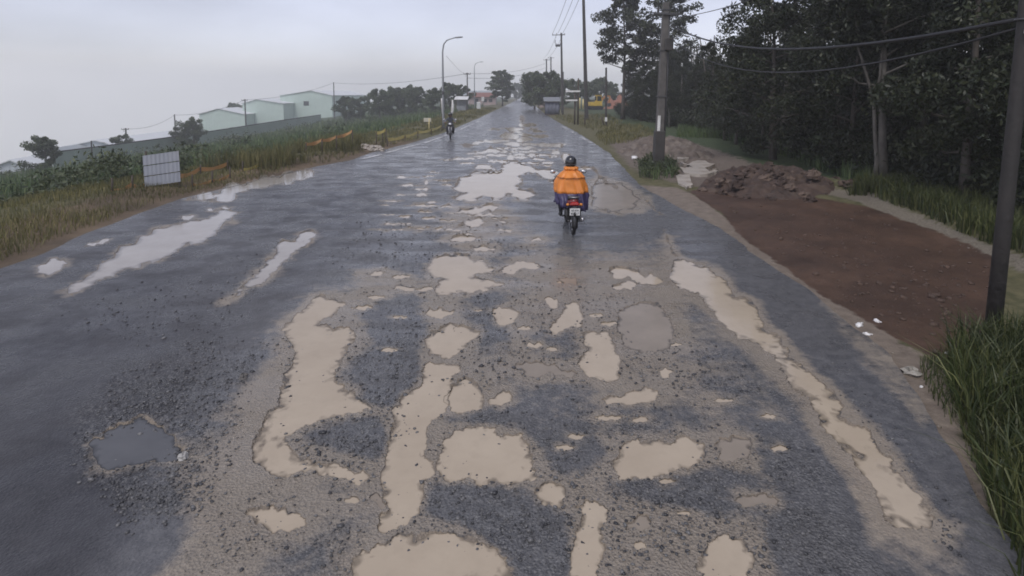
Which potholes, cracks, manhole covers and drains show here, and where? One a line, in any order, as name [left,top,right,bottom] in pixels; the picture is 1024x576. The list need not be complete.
pothole [60,208,239,296]
pothole [610,433,706,481]
pothole [251,294,373,486]
pothole [230,229,317,299]
pothole [616,301,675,354]
pothole [435,424,539,488]
pothole [451,160,559,202]
pothole [670,259,936,530]
pothole [425,253,506,296]
pothole [350,531,514,576]
pothole [88,414,185,472]
